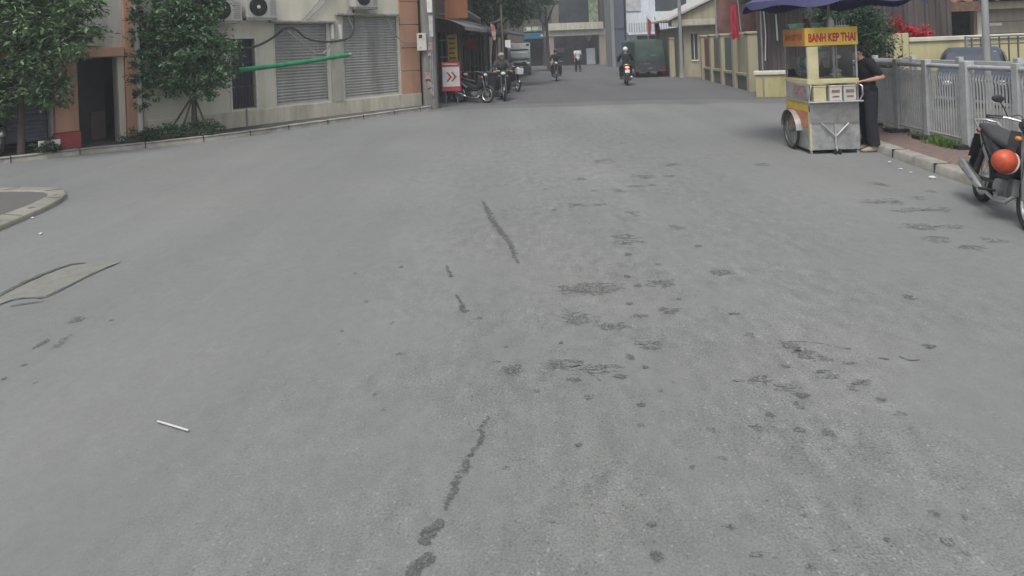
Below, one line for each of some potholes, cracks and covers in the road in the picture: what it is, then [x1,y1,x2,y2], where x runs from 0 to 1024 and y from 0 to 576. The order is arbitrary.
pothole [558,282,620,296]
crack [406,418,490,576]
crack [481,200,519,263]
pothole [794,349,822,359]
